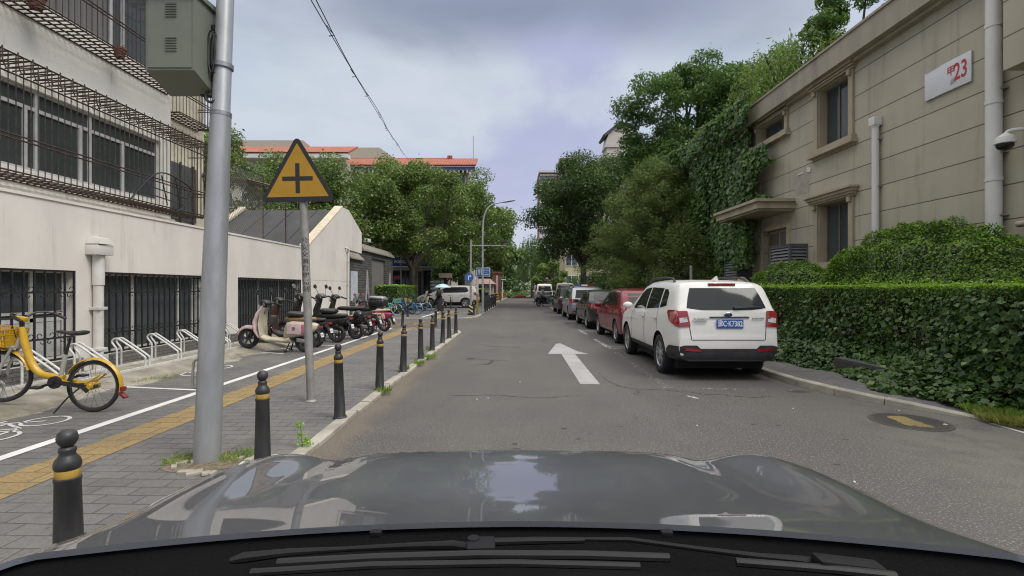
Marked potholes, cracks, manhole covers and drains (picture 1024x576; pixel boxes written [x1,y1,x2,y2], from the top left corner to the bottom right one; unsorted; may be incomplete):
manhole cover [867,413,956,432]
